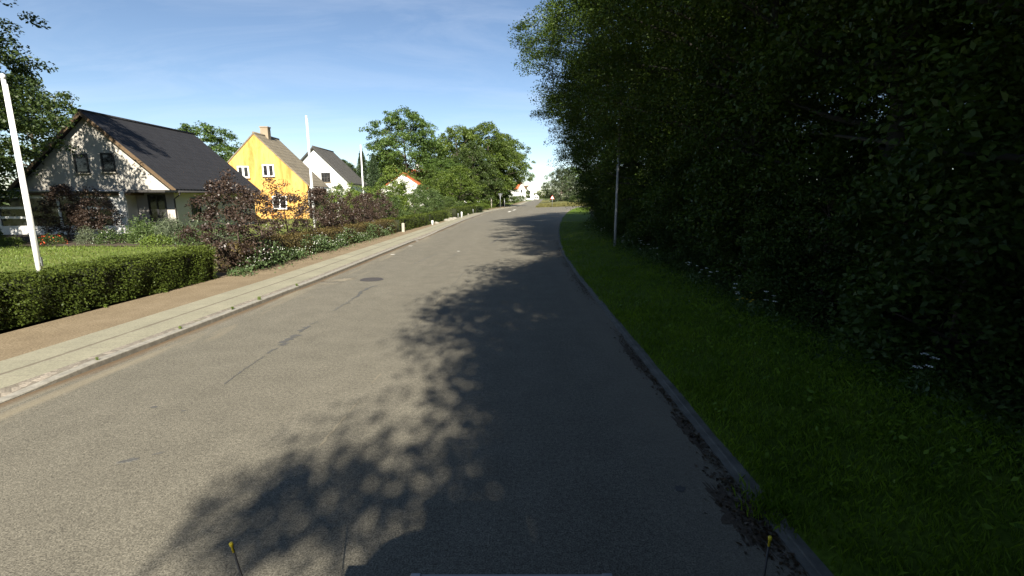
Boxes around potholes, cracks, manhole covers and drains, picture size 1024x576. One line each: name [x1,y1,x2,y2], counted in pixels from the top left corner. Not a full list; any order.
crack [224,285,378,385]
